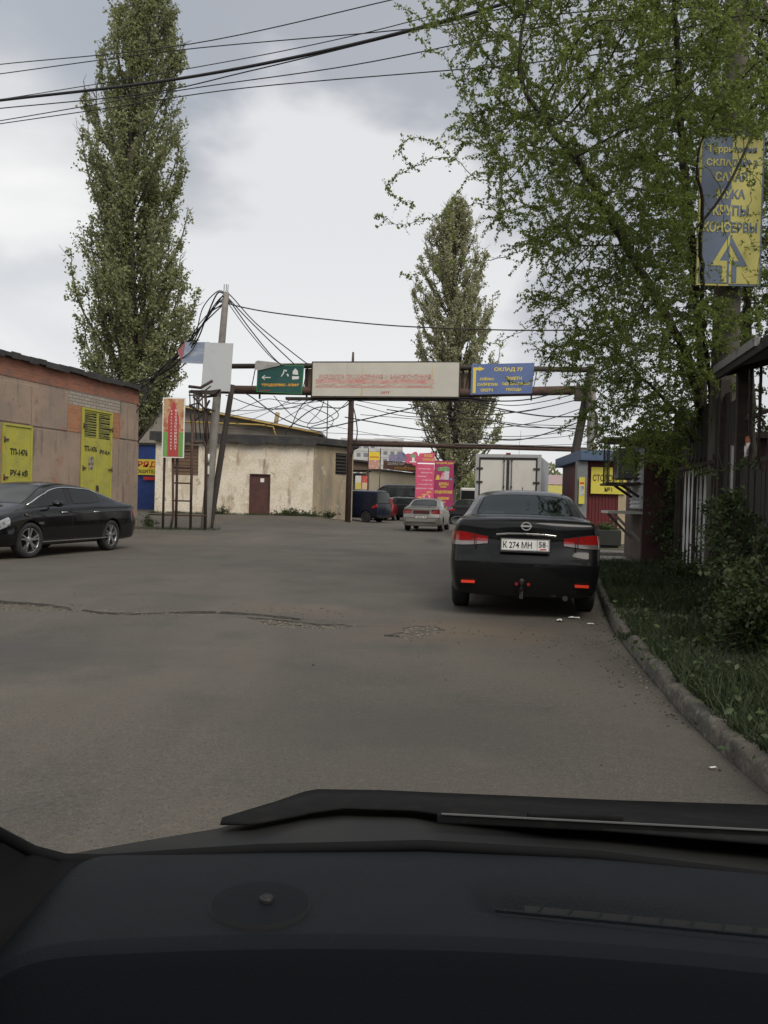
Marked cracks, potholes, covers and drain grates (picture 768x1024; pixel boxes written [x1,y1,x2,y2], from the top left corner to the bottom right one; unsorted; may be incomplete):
pothole [393,626,446,640]
pothole [247,617,352,630]
crack [82,609,300,621]
